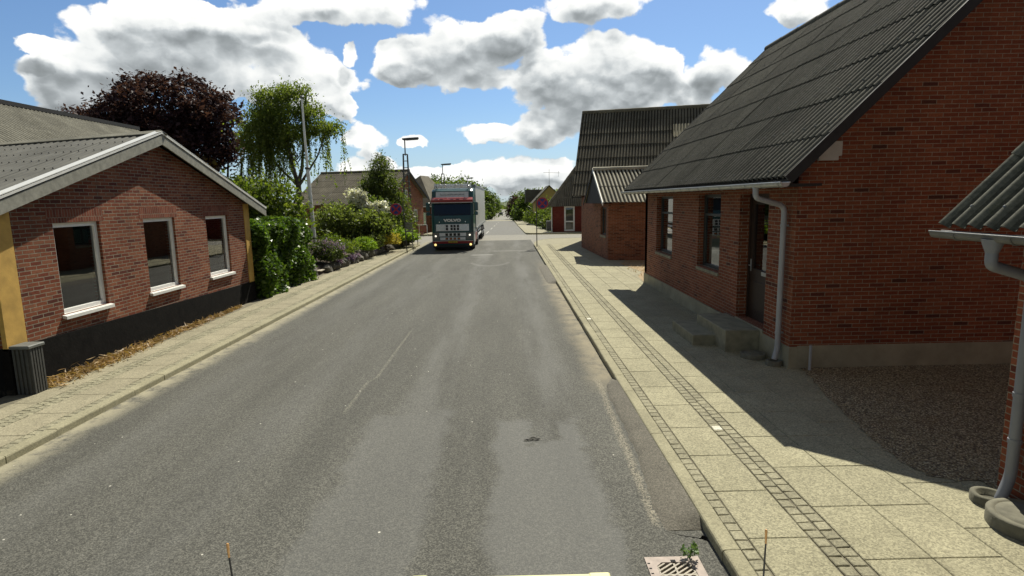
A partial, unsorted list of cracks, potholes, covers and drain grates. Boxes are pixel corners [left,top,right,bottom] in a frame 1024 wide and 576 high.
drain grate [644,556,708,576]
crack [662,530,709,542]
